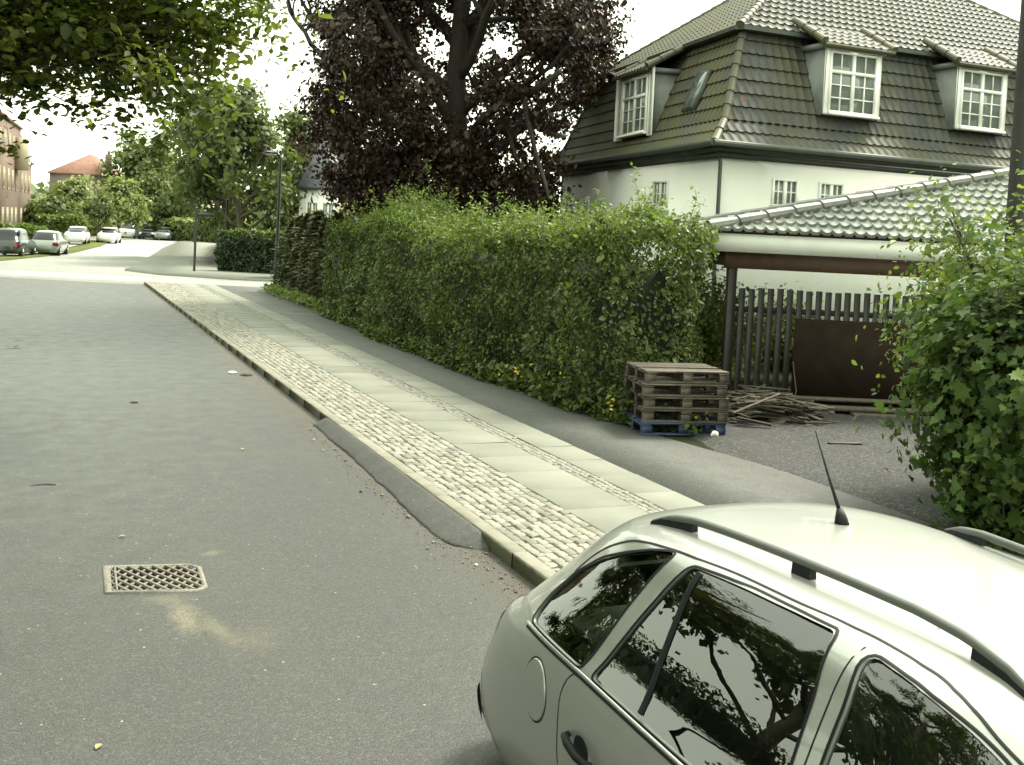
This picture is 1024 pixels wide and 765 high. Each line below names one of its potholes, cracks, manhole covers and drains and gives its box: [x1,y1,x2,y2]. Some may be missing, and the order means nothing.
drain grate [103,564,208,594]
